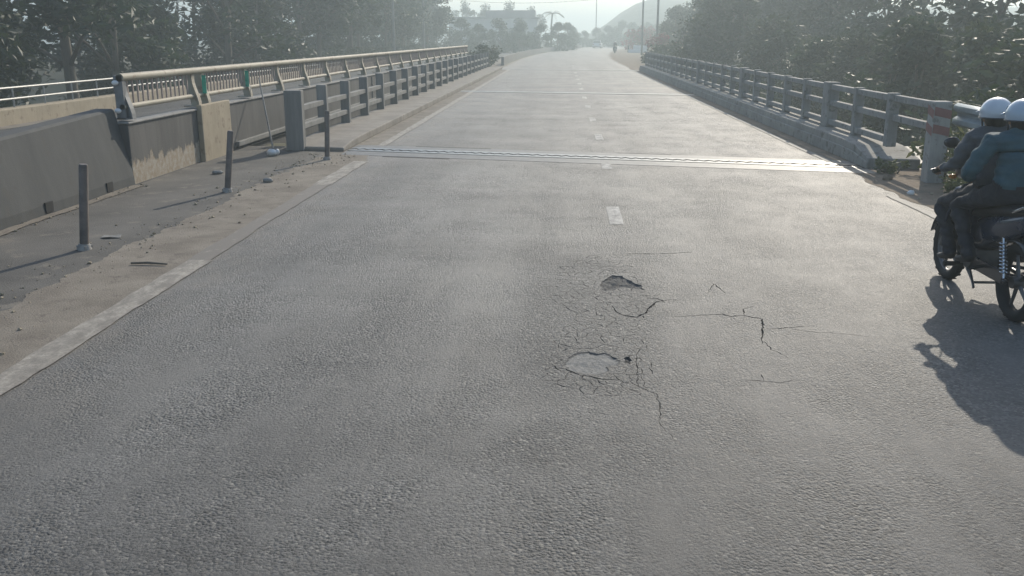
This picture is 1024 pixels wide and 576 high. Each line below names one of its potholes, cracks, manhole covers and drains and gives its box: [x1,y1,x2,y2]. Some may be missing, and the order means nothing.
pothole [600,275,644,291]
pothole [564,351,621,375]
crack [540,255,860,438]
